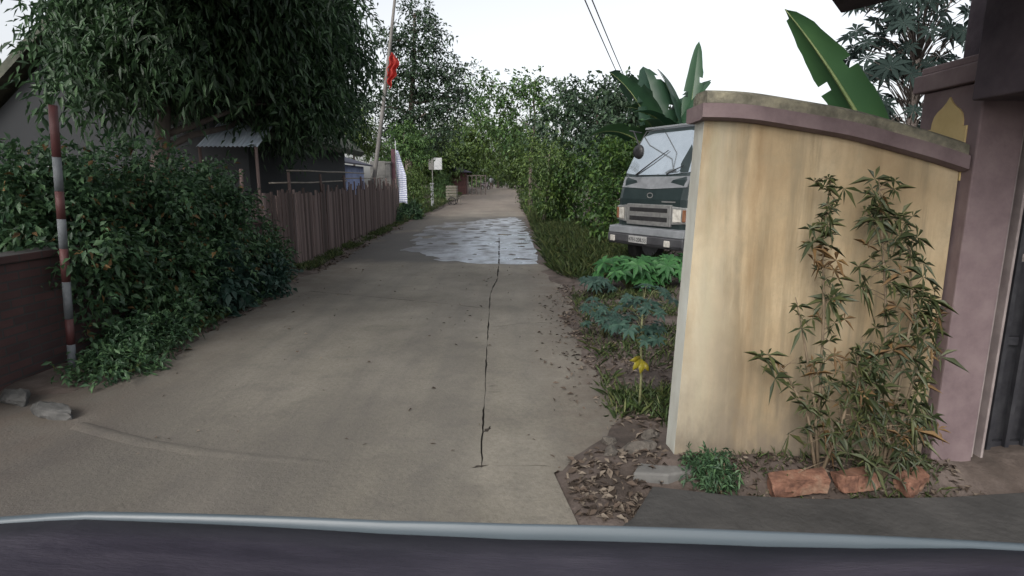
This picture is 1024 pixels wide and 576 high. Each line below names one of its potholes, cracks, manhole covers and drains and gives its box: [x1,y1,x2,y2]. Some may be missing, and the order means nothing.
crack [313,241,545,468]
